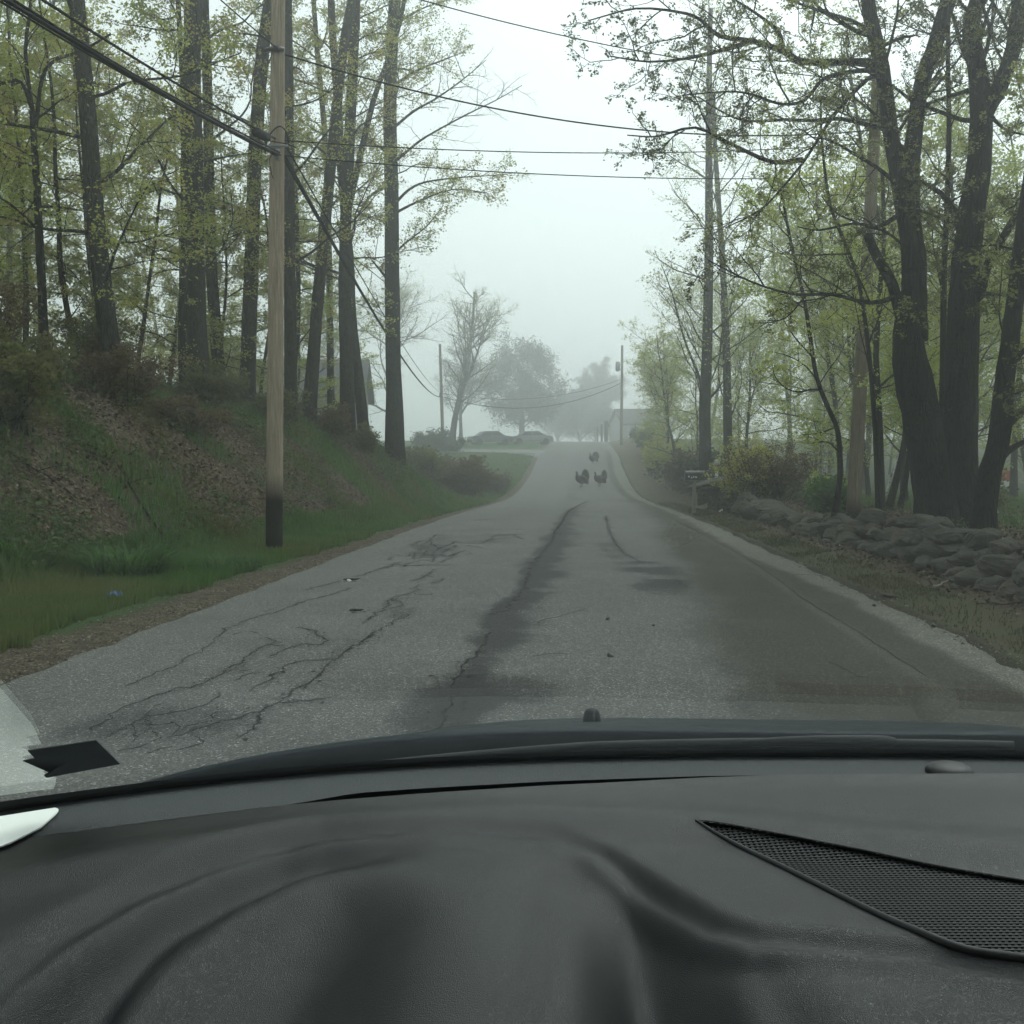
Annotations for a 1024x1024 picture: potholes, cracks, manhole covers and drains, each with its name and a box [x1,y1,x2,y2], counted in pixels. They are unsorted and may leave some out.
crack [604,516,642,561]
crack [358,519,519,576]
crack [89,569,443,753]
crack [426,501,587,730]
